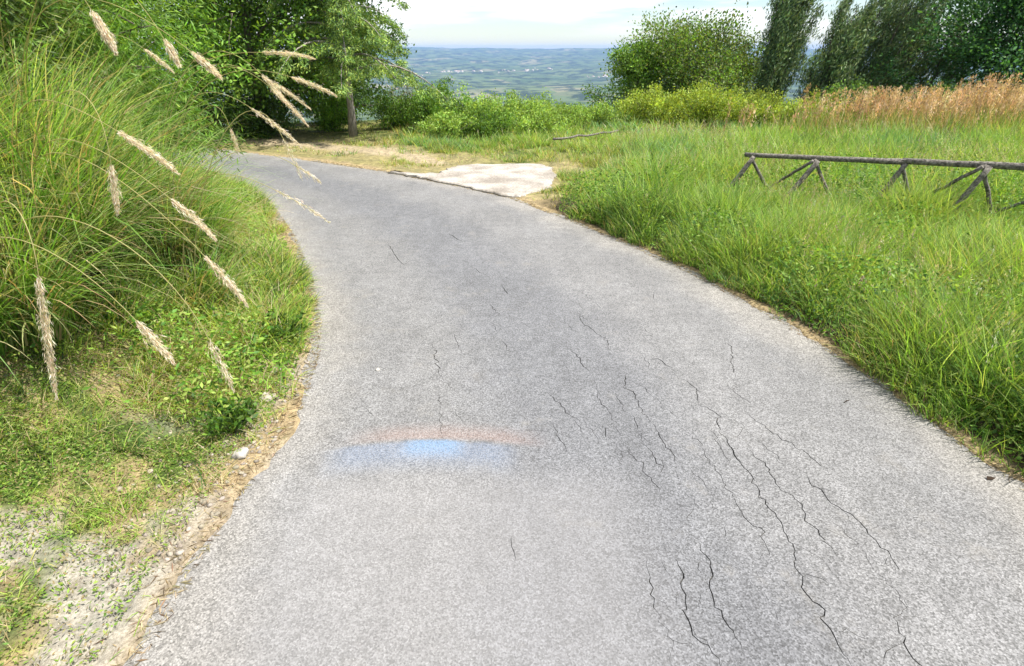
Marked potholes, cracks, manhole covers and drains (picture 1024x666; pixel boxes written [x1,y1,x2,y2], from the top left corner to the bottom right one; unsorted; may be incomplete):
crack [431,333,462,434]
crack [548,343,922,666]
